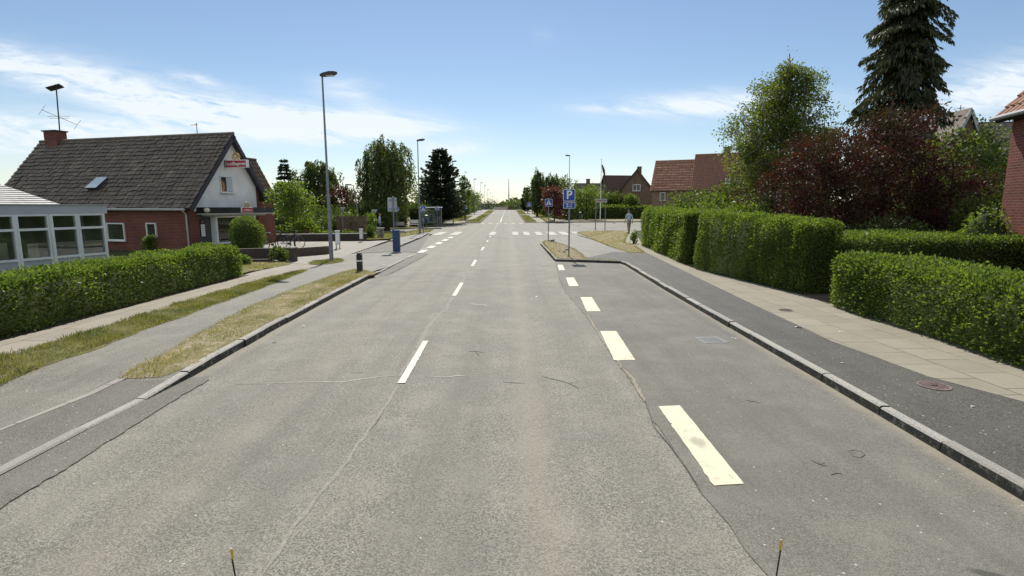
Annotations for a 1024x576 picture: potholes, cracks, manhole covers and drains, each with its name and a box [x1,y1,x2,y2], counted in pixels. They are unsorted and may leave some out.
manhole cover [916,381,952,391]
crack [252,375,469,384]
